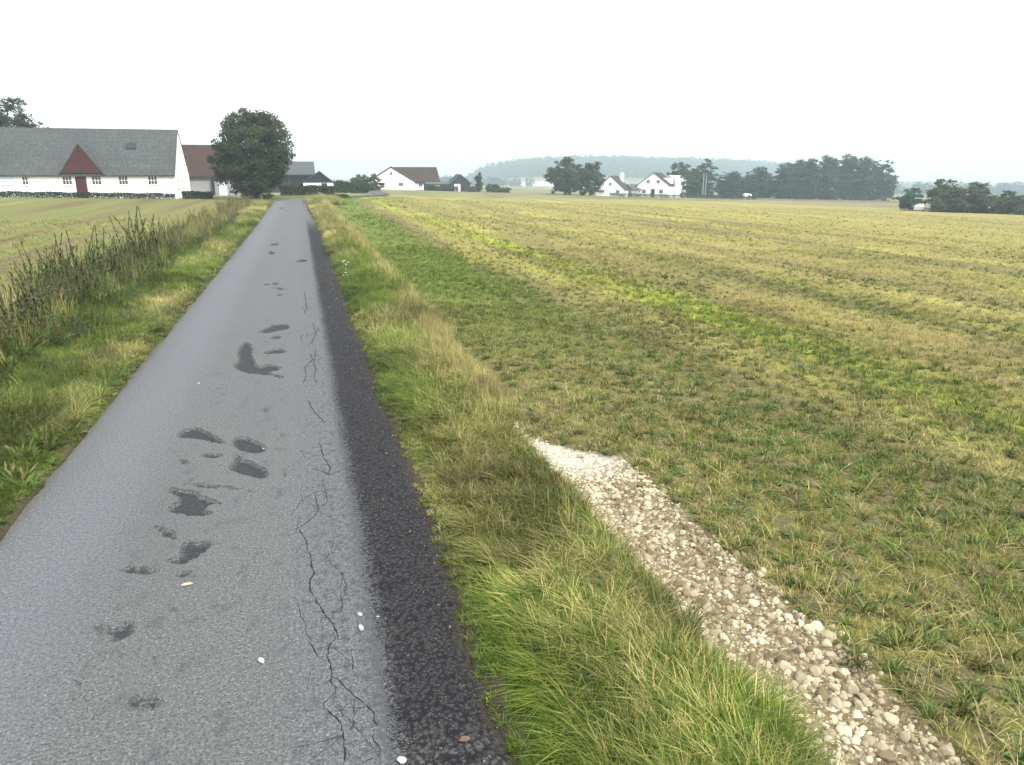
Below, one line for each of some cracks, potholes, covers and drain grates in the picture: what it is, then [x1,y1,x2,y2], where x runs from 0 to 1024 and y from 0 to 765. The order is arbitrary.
pothole [233,342,284,379]
pothole [232,436,268,454]
pothole [176,427,225,444]
crack [300,293,323,383]
pothole [228,455,269,479]
crack [292,401,381,765]
pothole [167,487,223,516]
pothole [165,541,212,565]
